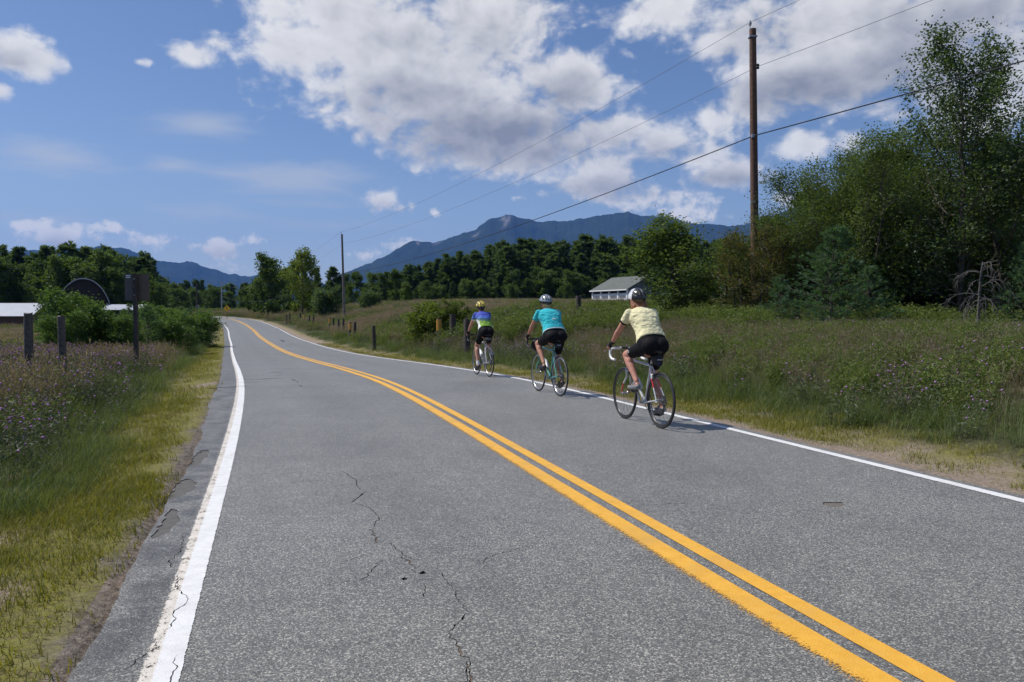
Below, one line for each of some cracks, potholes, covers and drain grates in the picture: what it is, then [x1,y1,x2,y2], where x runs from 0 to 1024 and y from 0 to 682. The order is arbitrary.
pothole [166,479,197,500]
pothole [151,509,181,539]
crack [329,472,473,682]
pothole [188,450,209,466]
